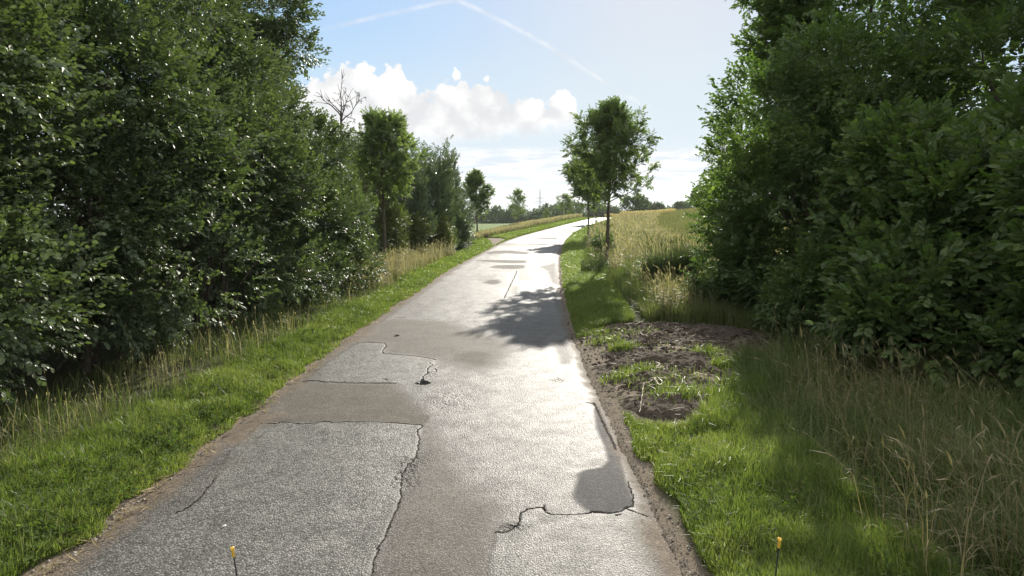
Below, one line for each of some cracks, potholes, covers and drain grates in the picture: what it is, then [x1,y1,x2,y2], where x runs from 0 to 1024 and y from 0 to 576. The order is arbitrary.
crack [175,479,215,514]
crack [494,481,648,534]
crack [260,421,423,576]
